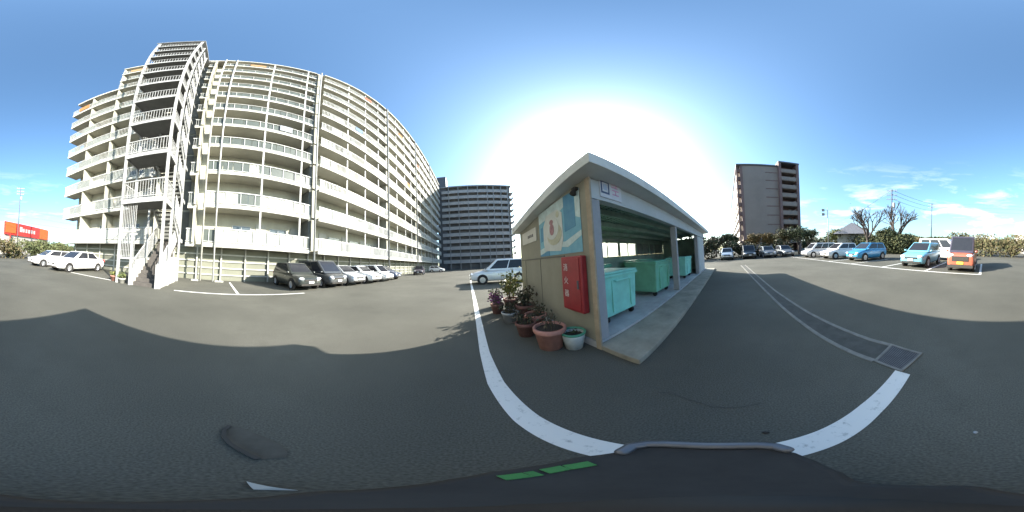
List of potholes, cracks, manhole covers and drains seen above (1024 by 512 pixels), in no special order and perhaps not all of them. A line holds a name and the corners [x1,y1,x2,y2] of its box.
crack [654,392,760,408]
